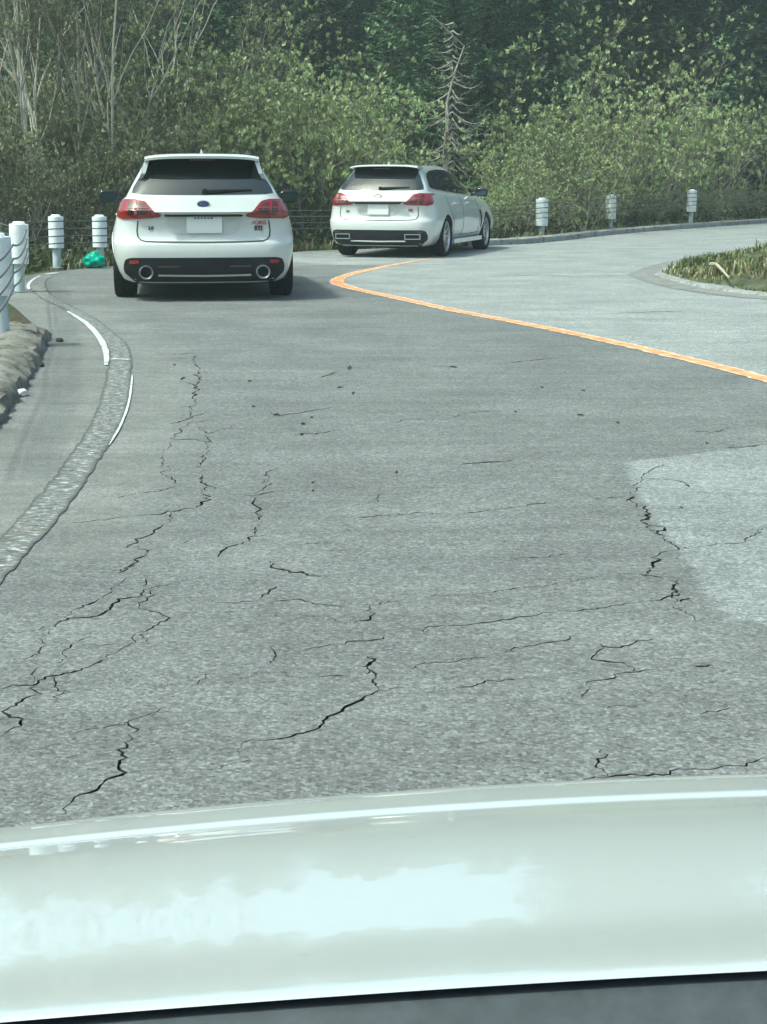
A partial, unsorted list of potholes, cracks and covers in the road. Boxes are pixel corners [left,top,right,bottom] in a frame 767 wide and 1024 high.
crack [62,673,210,819]
crack [218,464,278,557]
crack [0,352,234,737]
crack [402,461,763,632]
crack [584,747,762,780]
crack [198,561,547,773]
